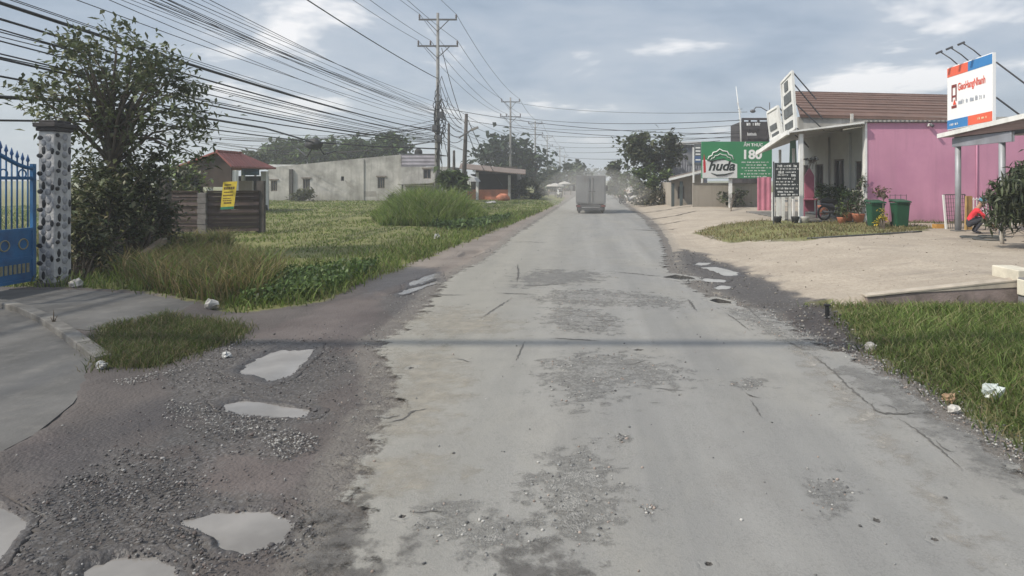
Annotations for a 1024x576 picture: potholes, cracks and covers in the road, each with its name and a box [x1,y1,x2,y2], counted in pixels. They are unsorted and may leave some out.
pothole [61,542,197,576]
pothole [207,395,330,420]
pothole [0,494,42,571]
pothole [391,277,446,298]
pothole [157,499,315,564]
pothole [656,273,703,282]
pothole [401,271,445,288]
pothole [703,296,737,306]
crack [787,341,962,469]
crack [481,267,611,321]
pothole [219,342,326,387]
pothole [693,264,748,278]
